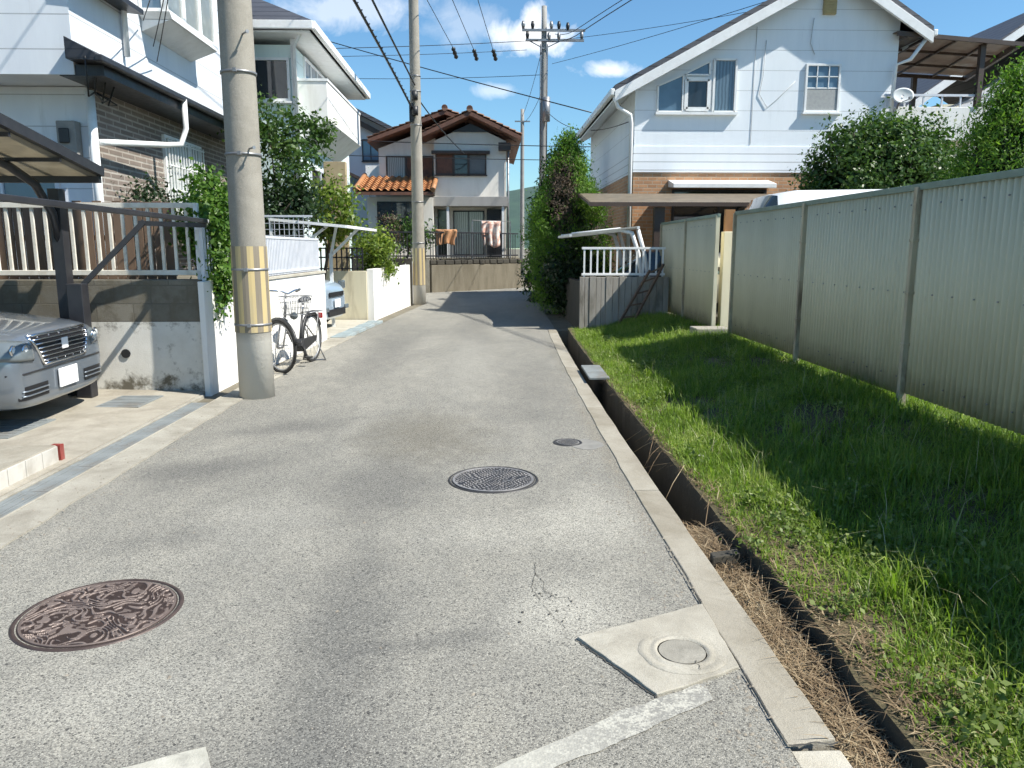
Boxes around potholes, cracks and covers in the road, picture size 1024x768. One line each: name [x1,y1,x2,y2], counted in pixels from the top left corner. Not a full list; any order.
crack [518,562,657,698]
manhole cover [577,604,739,697]
manhole cover [8,579,184,652]
manhole cover [553,438,582,446]
manhole cover [448,466,539,494]
